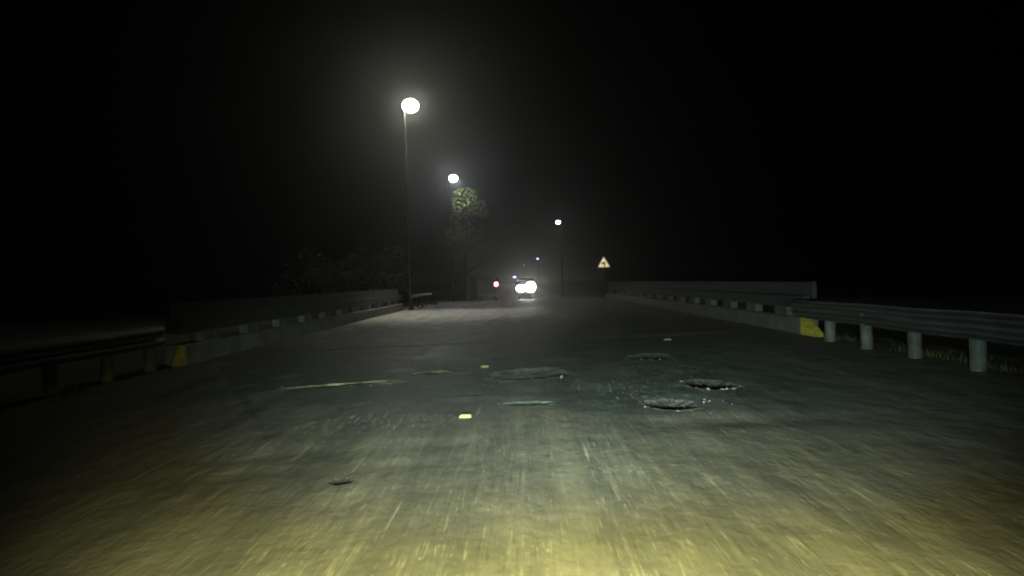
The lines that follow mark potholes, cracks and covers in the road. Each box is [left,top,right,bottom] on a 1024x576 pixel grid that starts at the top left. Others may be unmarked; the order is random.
pothole [329,477,354,485]
pothole [680,378,745,391]
pothole [642,394,733,412]
pothole [484,367,580,382]
